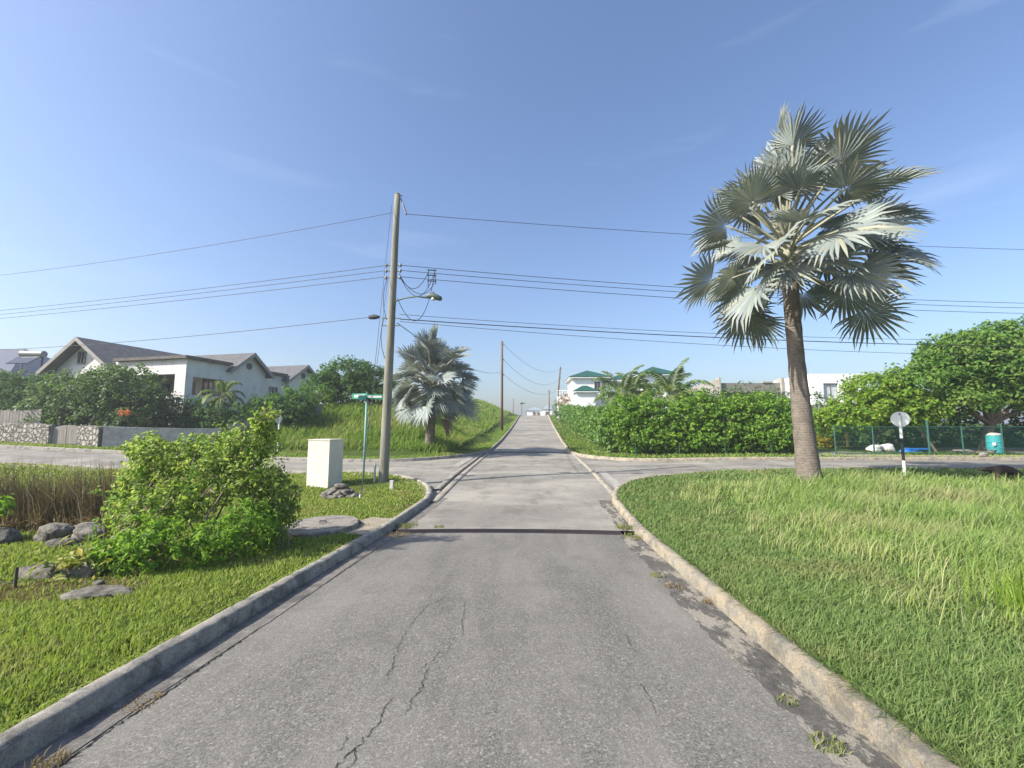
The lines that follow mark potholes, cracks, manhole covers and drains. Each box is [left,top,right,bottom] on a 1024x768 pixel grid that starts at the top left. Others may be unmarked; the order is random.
crack [335,598,469,768]
